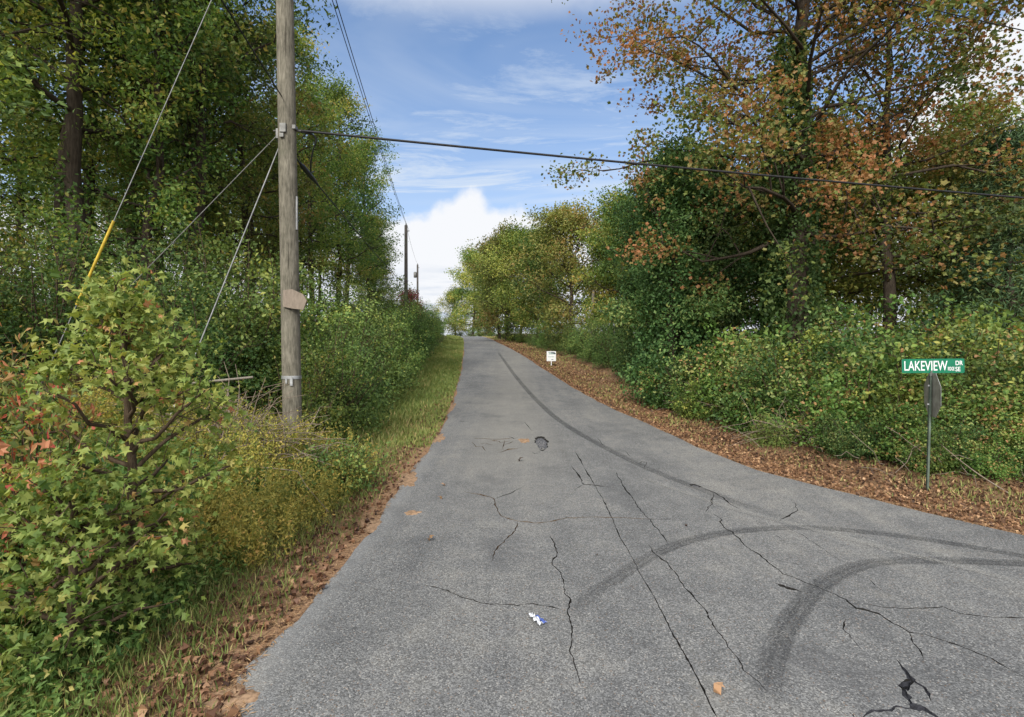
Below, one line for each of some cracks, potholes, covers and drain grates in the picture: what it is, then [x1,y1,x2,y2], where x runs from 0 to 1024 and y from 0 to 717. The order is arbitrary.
crack [704,488,1024,717]
crack [427,453,768,693]
pothole [534,436,549,449]
